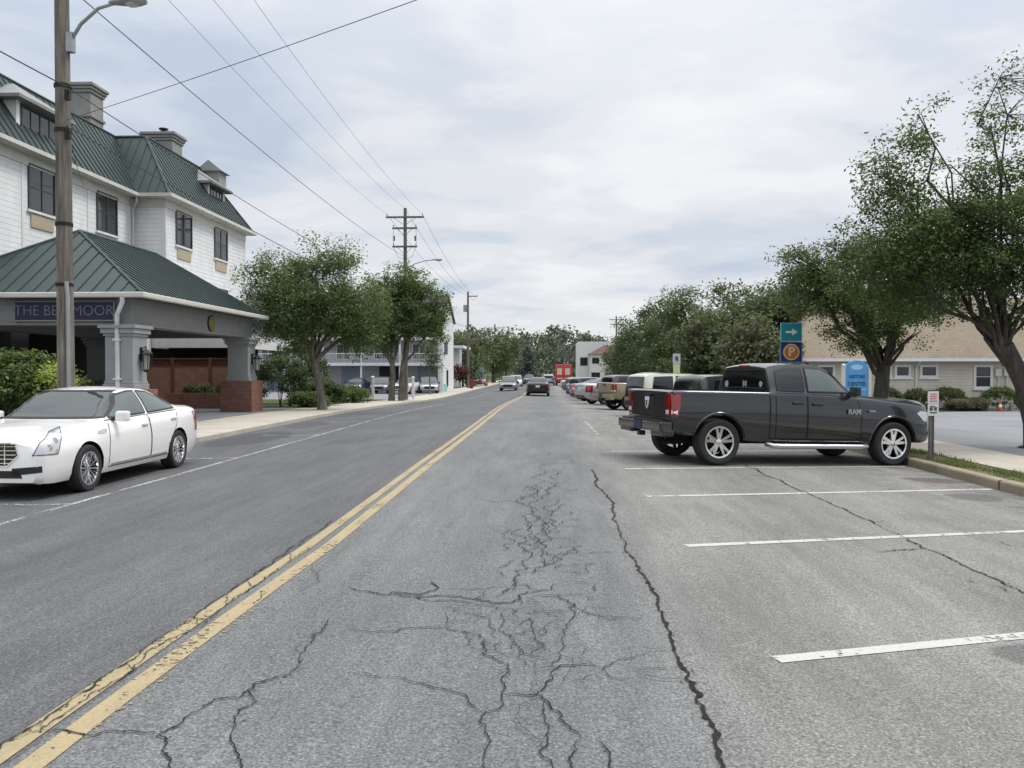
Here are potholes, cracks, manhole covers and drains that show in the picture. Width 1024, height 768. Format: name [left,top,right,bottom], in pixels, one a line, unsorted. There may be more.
crack [745,464,1024,596]
crack [591,469,731,768]
crack [46,620,328,768]
